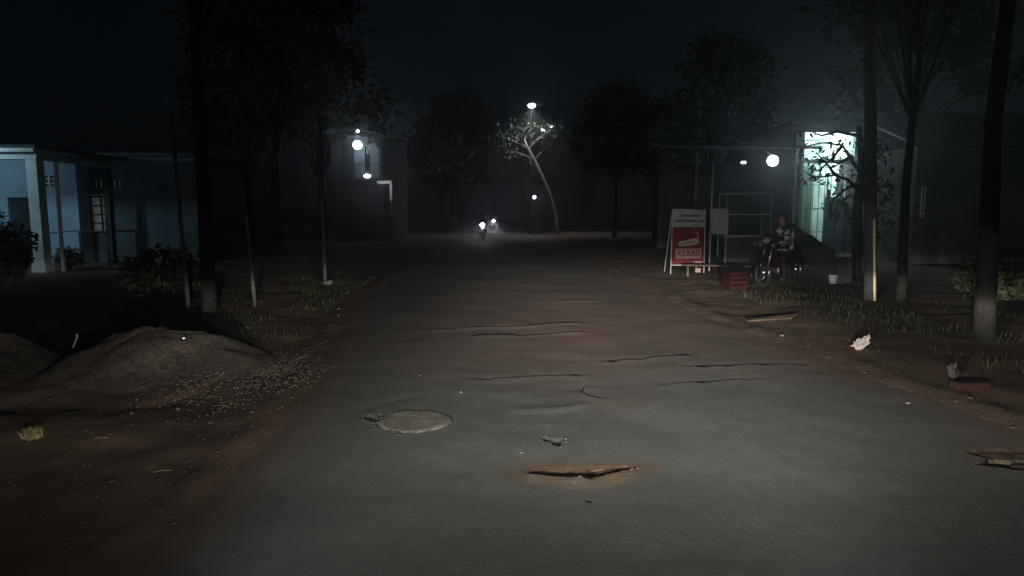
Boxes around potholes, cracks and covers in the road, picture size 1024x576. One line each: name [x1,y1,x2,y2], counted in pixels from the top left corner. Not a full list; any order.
manhole cover [370,409,454,435]
pothole [965,447,1024,471]
pothole [521,465,640,478]
pothole [540,436,568,448]
